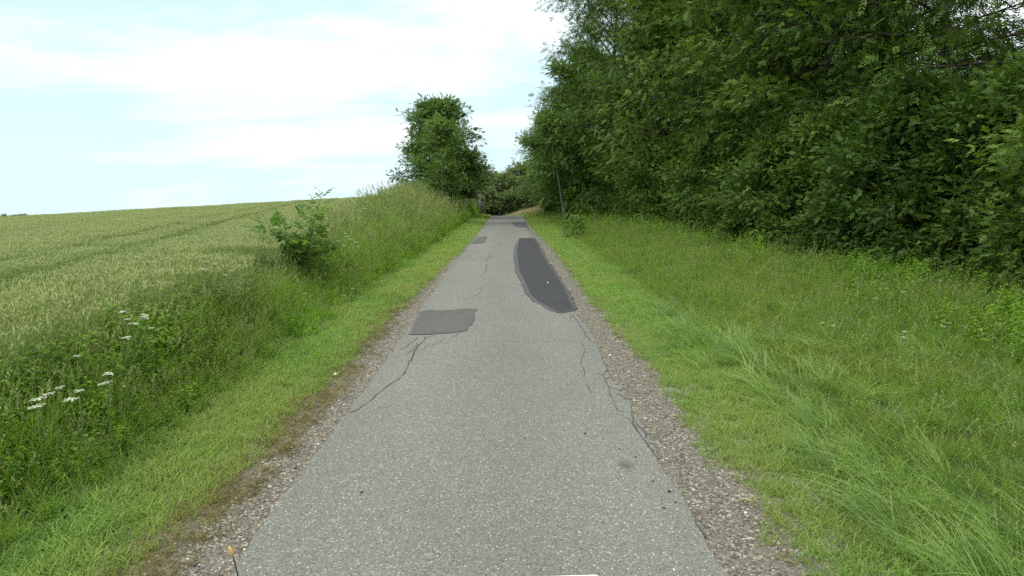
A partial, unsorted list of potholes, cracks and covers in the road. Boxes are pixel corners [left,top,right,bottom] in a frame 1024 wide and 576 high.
crack [348,334,458,413]
crack [570,315,658,458]
